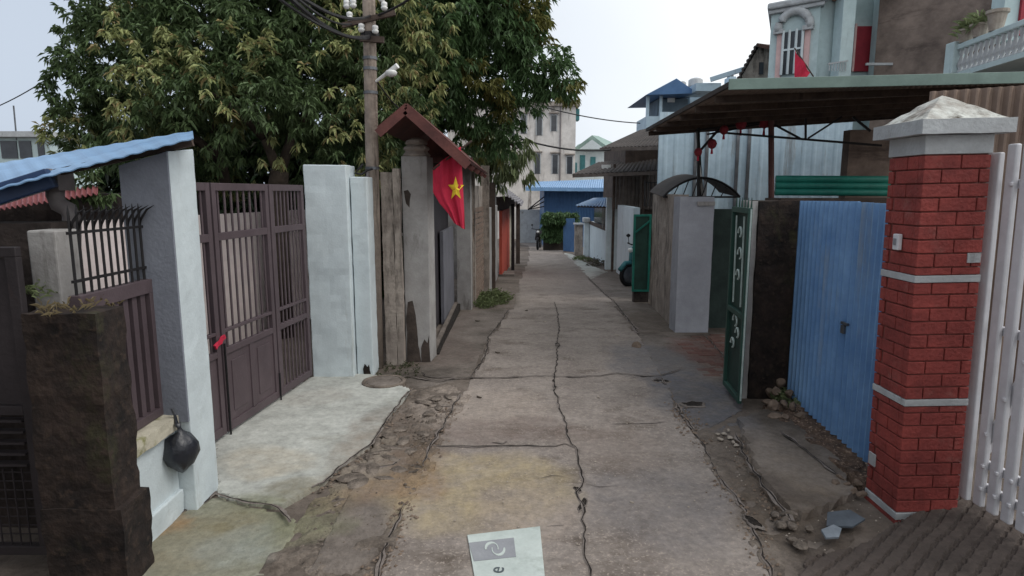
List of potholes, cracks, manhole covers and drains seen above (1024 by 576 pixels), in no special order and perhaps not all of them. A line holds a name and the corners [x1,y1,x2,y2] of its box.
crack [182,491,291,522]
manhole cover [362,375,406,388]
crack [542,302,607,576]
pothole [742,514,765,530]
